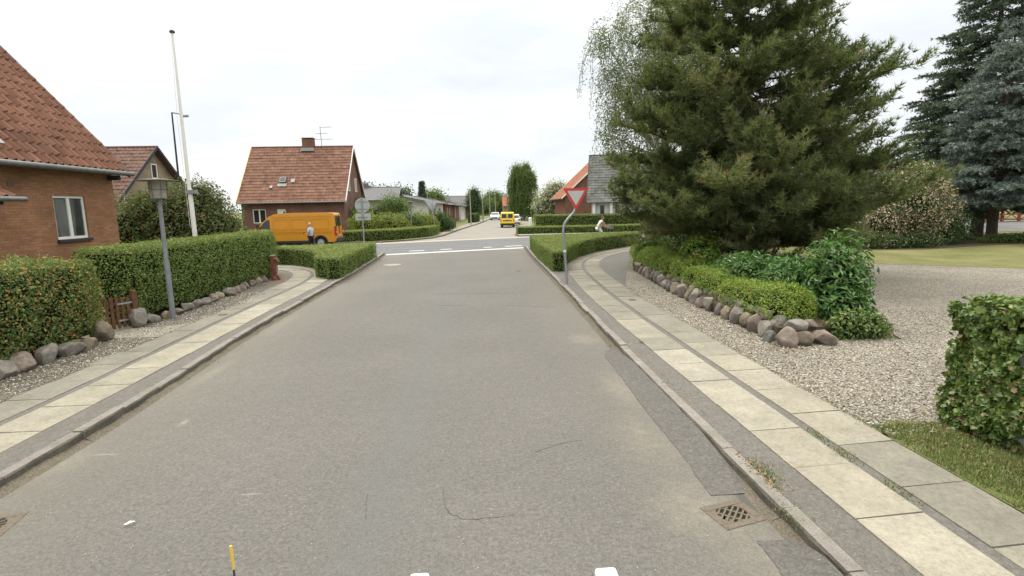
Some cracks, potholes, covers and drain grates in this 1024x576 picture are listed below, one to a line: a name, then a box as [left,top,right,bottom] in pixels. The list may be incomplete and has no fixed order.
drain grate [700,499,767,530]
drain grate [0,511,30,537]
